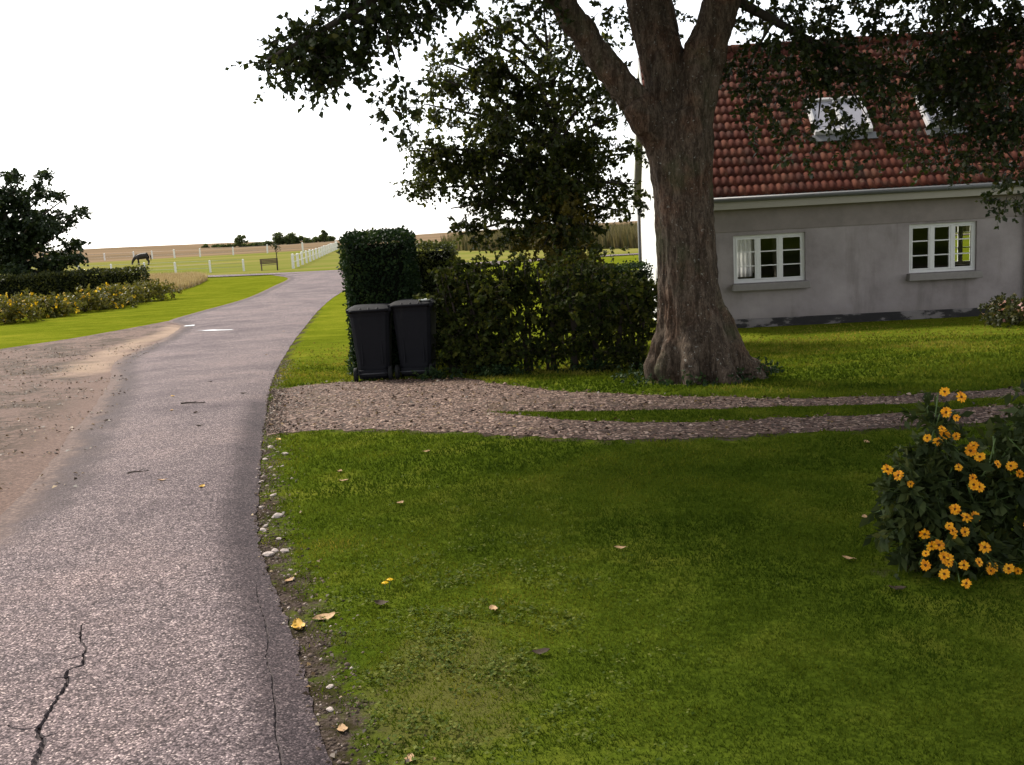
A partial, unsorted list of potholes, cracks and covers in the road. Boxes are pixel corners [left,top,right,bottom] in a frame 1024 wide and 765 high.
crack [256,584,284,765]
crack [7,618,90,765]
